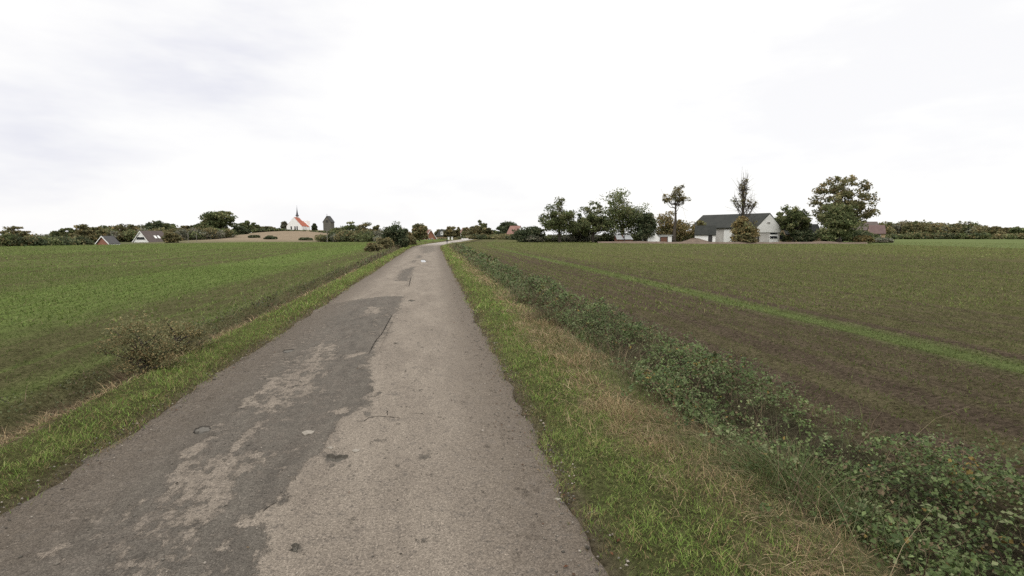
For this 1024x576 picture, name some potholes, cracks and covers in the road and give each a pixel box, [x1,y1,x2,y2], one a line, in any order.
pothole [193,425,211,434]
pothole [326,454,349,462]
